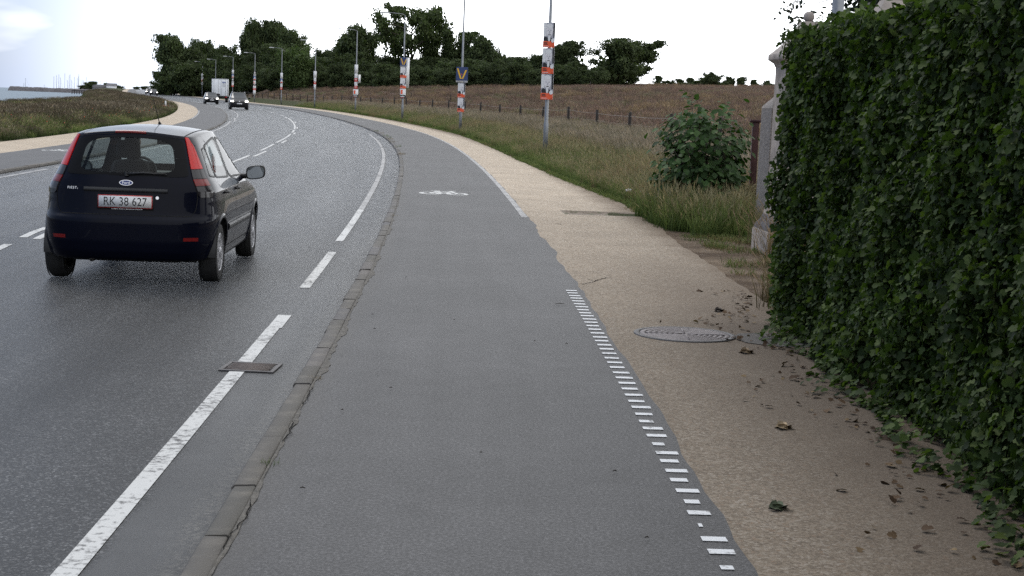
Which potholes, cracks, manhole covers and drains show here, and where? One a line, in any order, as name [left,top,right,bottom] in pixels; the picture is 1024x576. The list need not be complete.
drain grate [218,361,283,373]
manhole cover [634,326,736,343]
